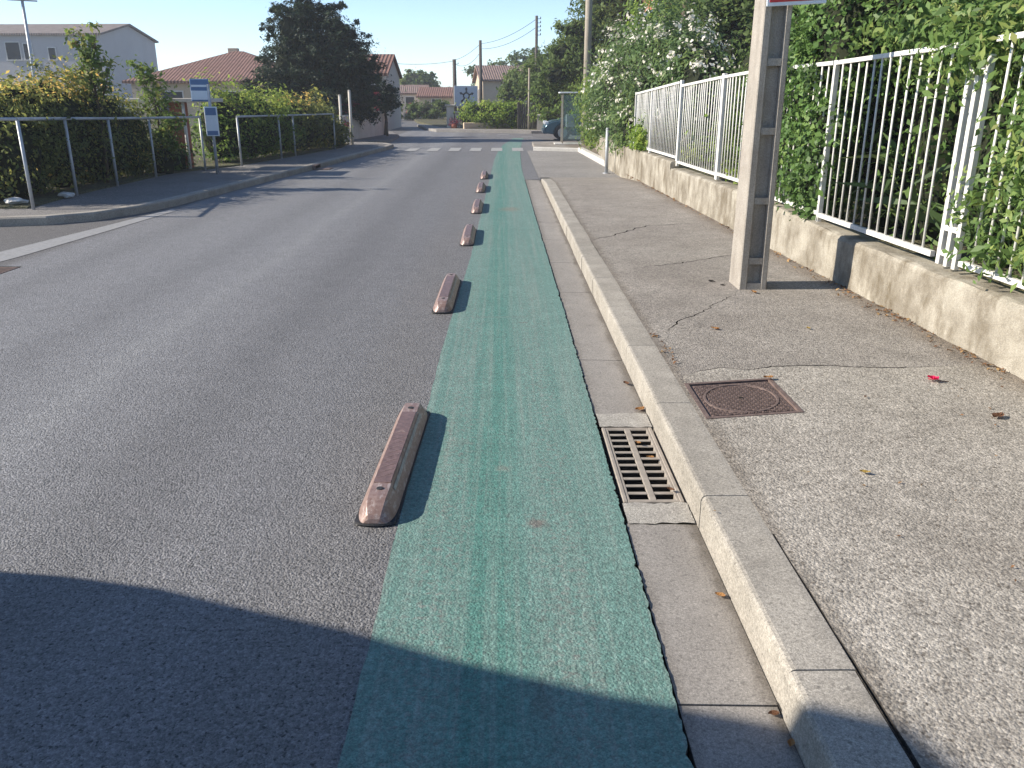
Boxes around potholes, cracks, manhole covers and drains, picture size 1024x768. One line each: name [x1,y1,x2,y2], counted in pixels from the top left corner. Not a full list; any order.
drain grate [601,427,685,519]
manhole cover [684,378,804,419]
crack [668,294,736,330]
